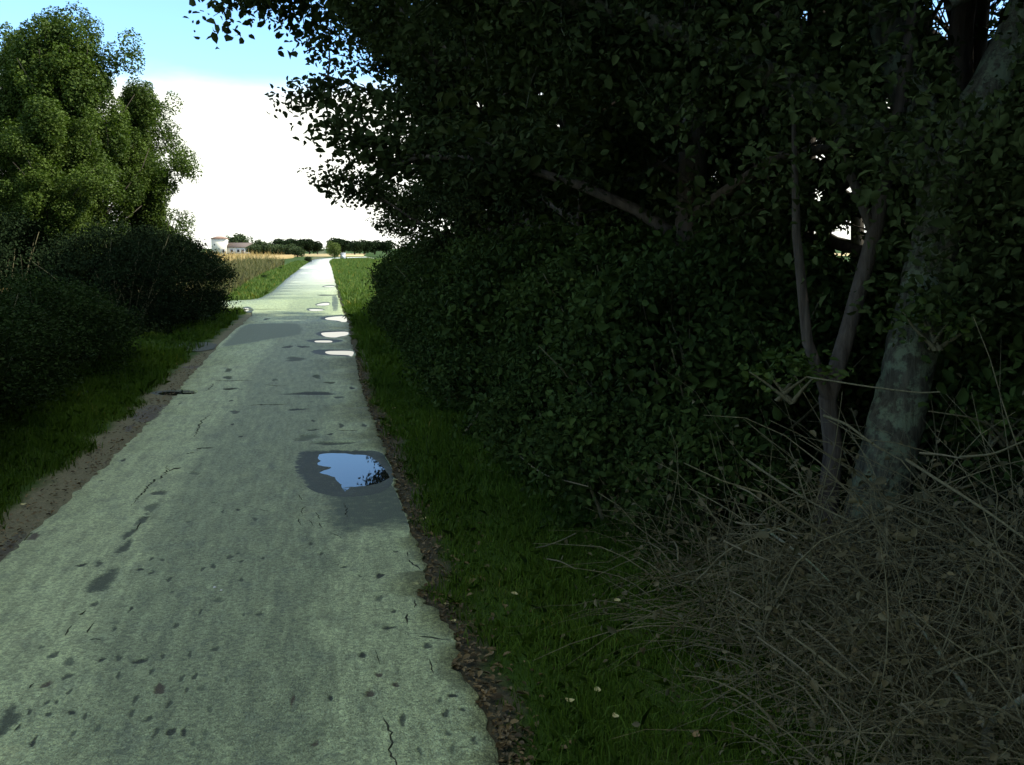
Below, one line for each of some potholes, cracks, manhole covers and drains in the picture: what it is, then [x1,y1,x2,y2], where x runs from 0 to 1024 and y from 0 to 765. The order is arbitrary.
pothole [319,315,349,323]
crack [298,495,350,538]
crack [131,414,213,505]
crack [382,716,397,765]
pothole [293,450,393,497]
pothole [315,330,350,338]
pothole [310,349,355,357]
